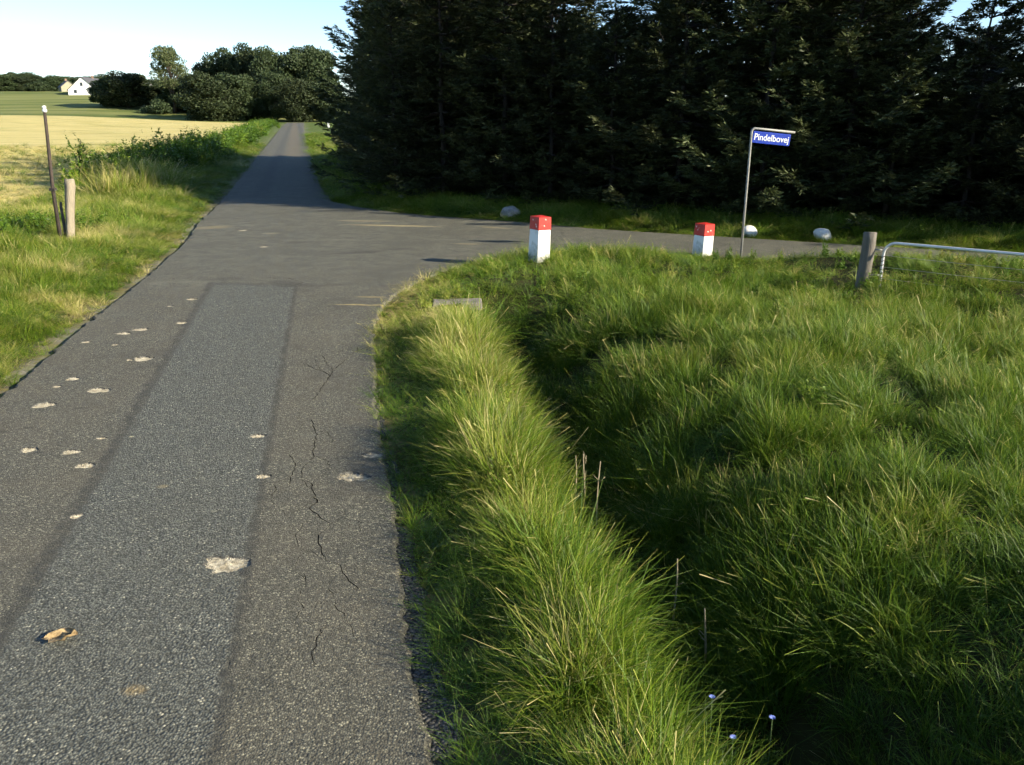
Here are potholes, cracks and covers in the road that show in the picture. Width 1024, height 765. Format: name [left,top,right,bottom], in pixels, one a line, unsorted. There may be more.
crack [296,347,362,399]
crack [271,418,367,664]
